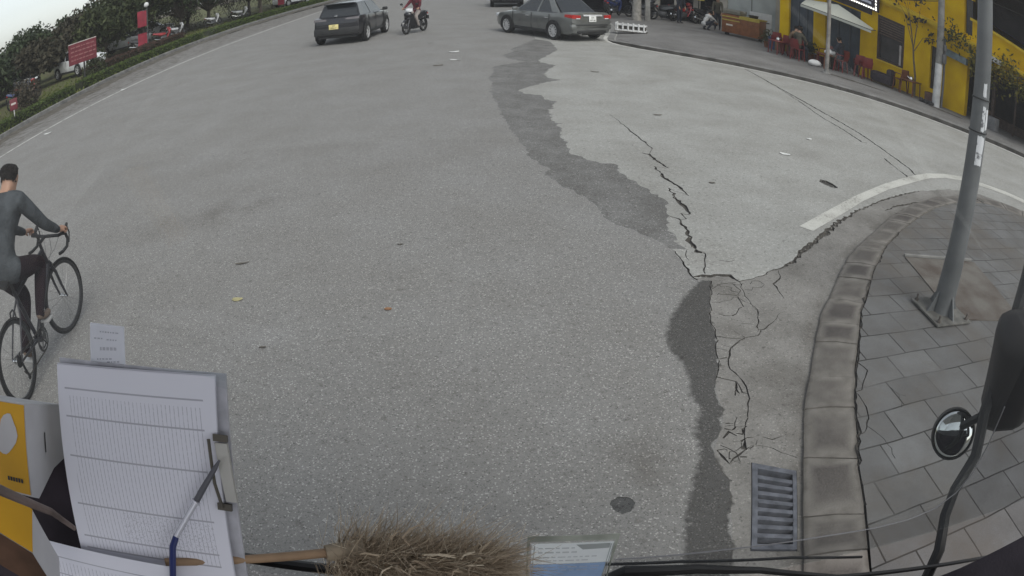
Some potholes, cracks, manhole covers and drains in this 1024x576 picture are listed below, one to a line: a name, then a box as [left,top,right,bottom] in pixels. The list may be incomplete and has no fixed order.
drain grate [750,463,798,551]
crack [615,118,919,507]
